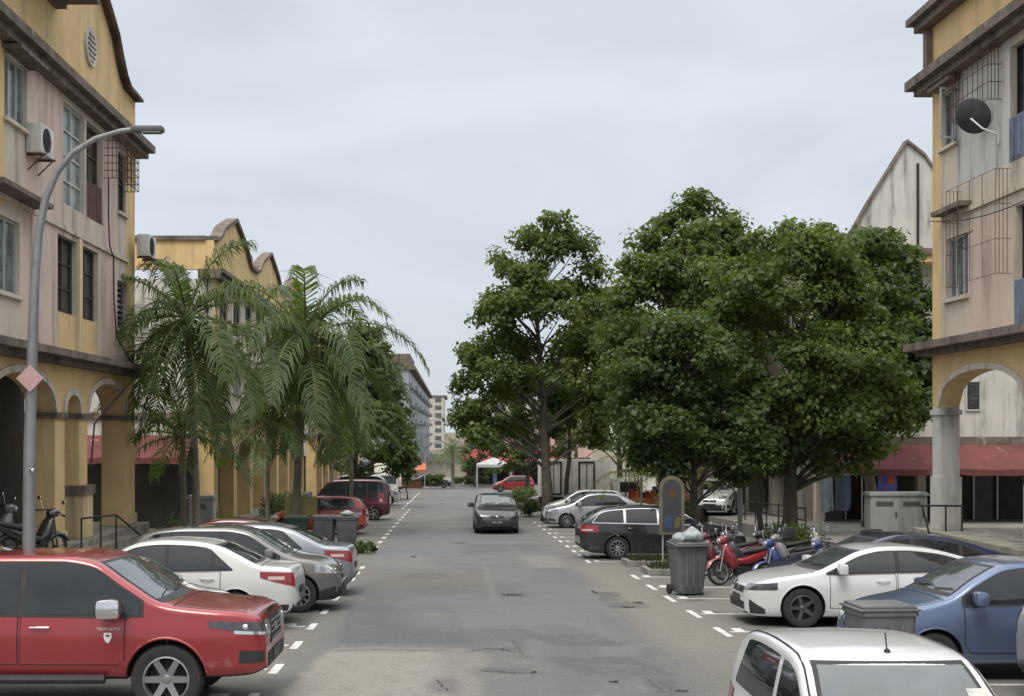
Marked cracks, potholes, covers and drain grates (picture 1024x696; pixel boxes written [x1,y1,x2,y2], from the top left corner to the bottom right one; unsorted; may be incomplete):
crack [472,644,537,674]
